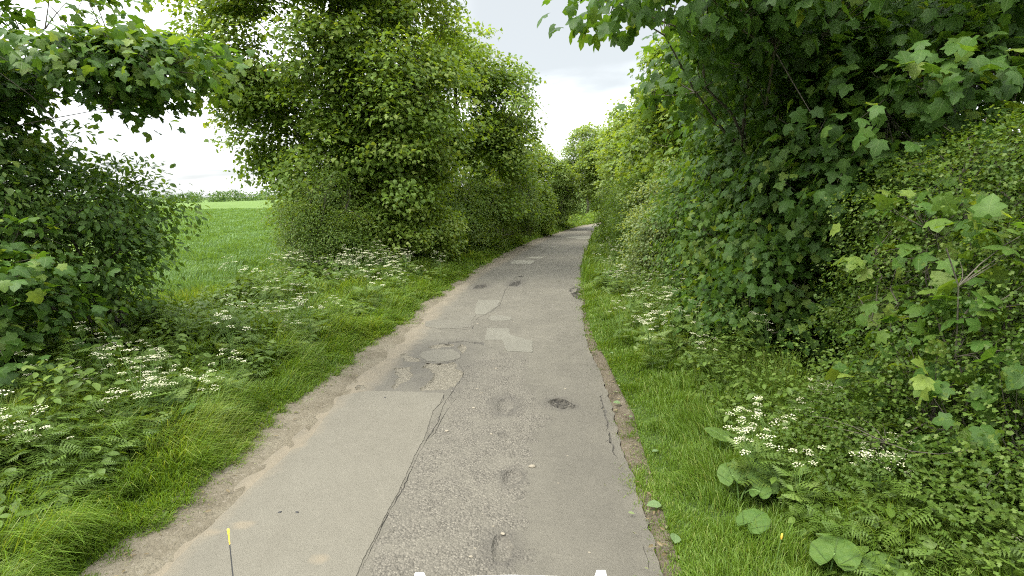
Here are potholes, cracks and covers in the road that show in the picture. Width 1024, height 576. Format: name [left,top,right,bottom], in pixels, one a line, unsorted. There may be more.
pothole [502,469,523,486]
crack [600,394,618,458]
crack [362,326,484,569]
pothole [548,398,576,410]
pothole [491,533,514,563]
pothole [496,398,514,414]
